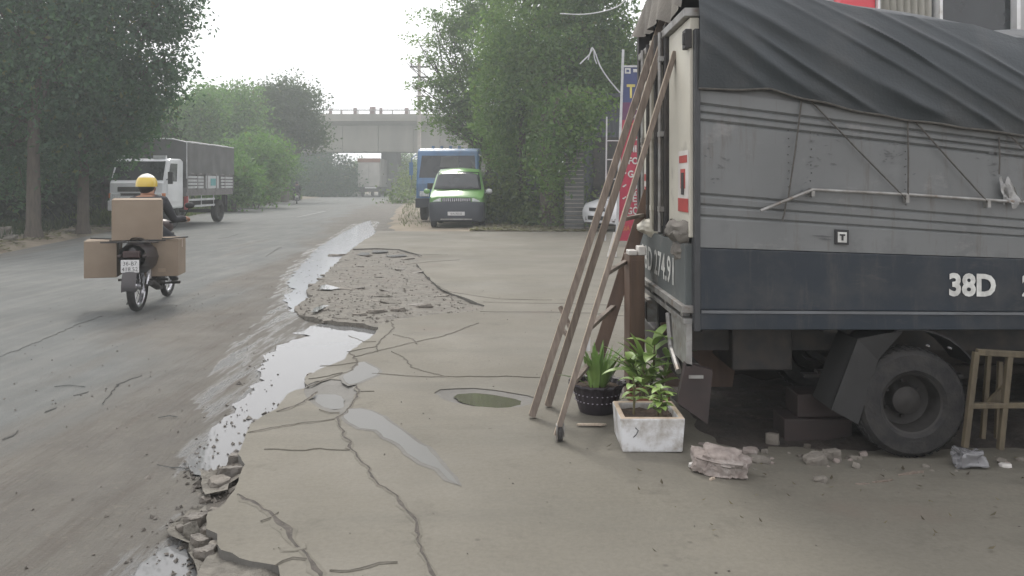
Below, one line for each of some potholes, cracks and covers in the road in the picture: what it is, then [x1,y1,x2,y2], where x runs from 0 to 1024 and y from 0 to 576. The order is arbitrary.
crack [237,285,624,576]
pothole [199,463,242,494]
pothole [167,506,207,574]
crack [44,375,142,413]
pothole [294,247,483,331]
pothole [304,380,357,414]
pothole [435,388,534,407]
